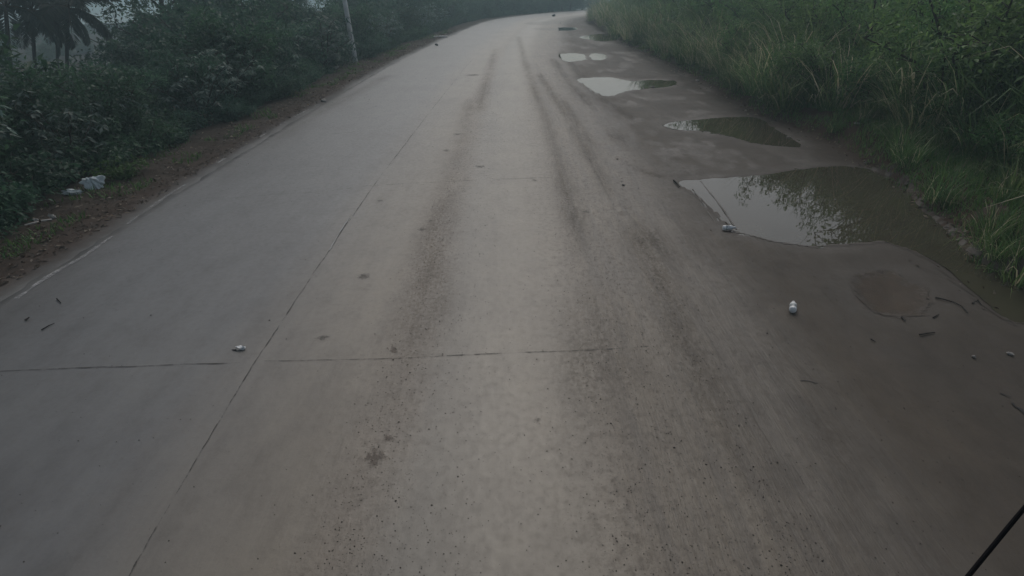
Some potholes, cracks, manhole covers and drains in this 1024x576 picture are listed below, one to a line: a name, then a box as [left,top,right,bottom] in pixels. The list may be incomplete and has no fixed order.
pothole [662,116,805,147]
pothole [675,165,1024,324]
pothole [577,77,678,96]
pothole [554,53,587,62]
